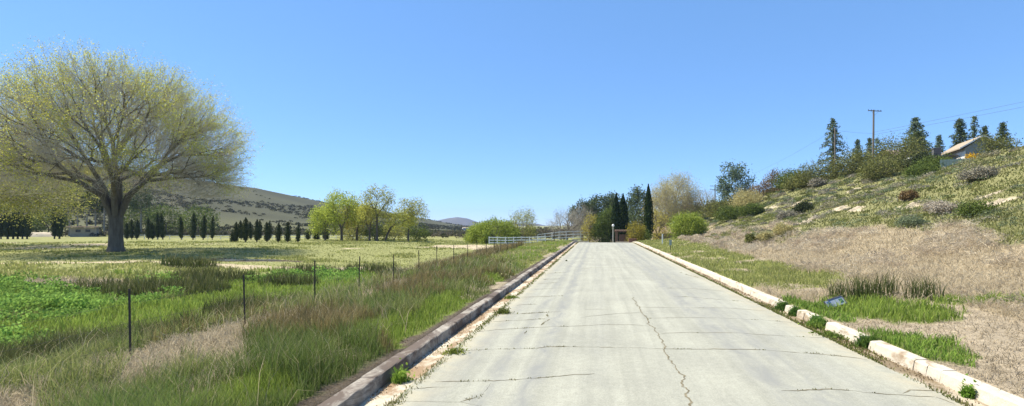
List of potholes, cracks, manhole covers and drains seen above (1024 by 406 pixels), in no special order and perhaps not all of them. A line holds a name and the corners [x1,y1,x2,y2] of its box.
crack [783,388,952,403]
crack [468,272,866,406]
crack [381,373,595,405]
